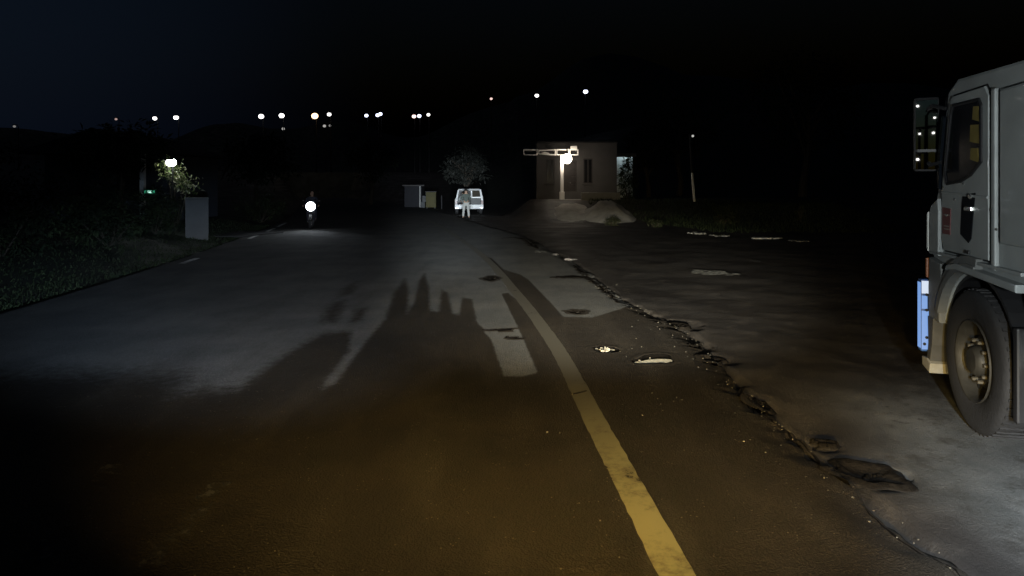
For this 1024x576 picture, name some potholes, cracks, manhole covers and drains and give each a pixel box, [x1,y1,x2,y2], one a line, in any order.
crack [738,386,820,463]
pothole [817,458,919,500]
crack [860,505,962,576]
pothole [624,352,682,366]
pothole [798,438,841,452]
pothole [586,344,628,354]
